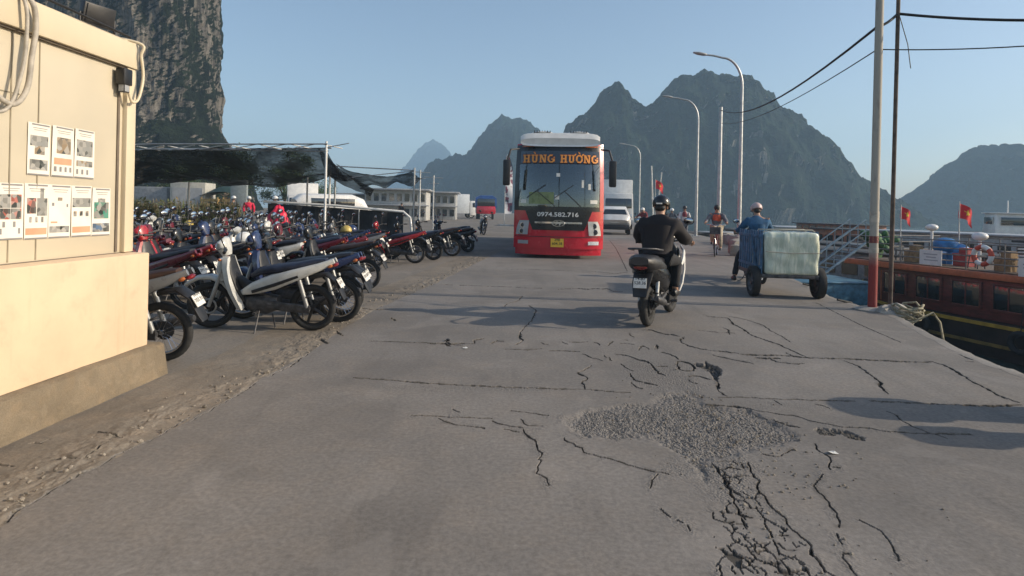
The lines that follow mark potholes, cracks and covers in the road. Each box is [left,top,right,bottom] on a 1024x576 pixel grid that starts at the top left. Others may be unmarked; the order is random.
pothole [554,388,807,488]
crack [562,302,1021,576]
crack [503,296,537,345]
crack [410,408,692,532]
